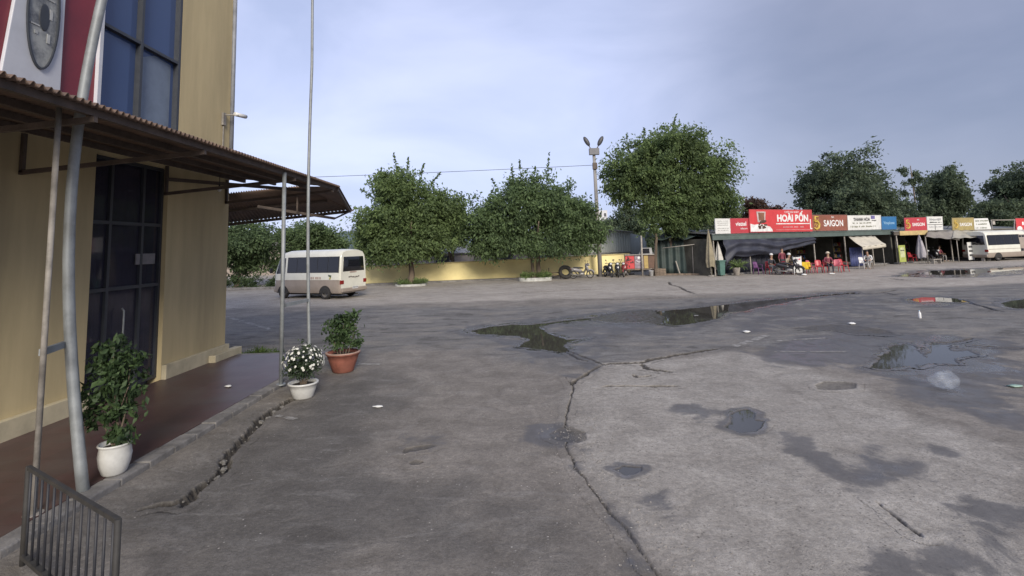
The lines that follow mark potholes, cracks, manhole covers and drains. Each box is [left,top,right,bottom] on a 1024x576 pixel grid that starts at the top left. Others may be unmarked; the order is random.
crack [122,394,301,518]
pothole [463,316,596,353]
pothole [863,342,988,372]
pothole [656,291,862,327]
crack [560,347,727,390]
pothole [602,461,655,481]
pothole [714,406,776,437]
crack [858,494,944,545]
